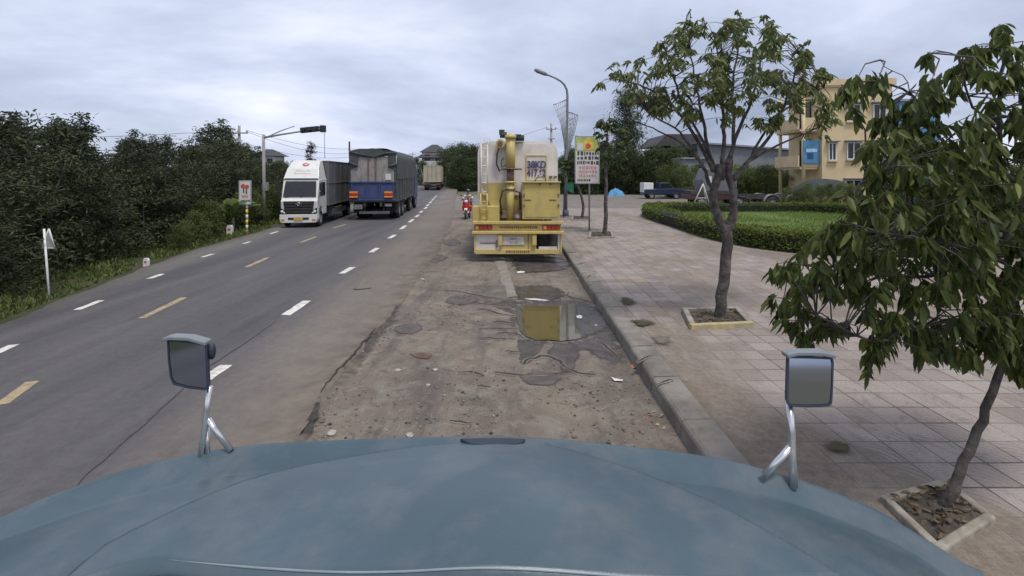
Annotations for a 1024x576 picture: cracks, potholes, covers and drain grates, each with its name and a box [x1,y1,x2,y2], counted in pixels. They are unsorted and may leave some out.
crack [432,290,620,388]
pothole [516,301,586,342]
